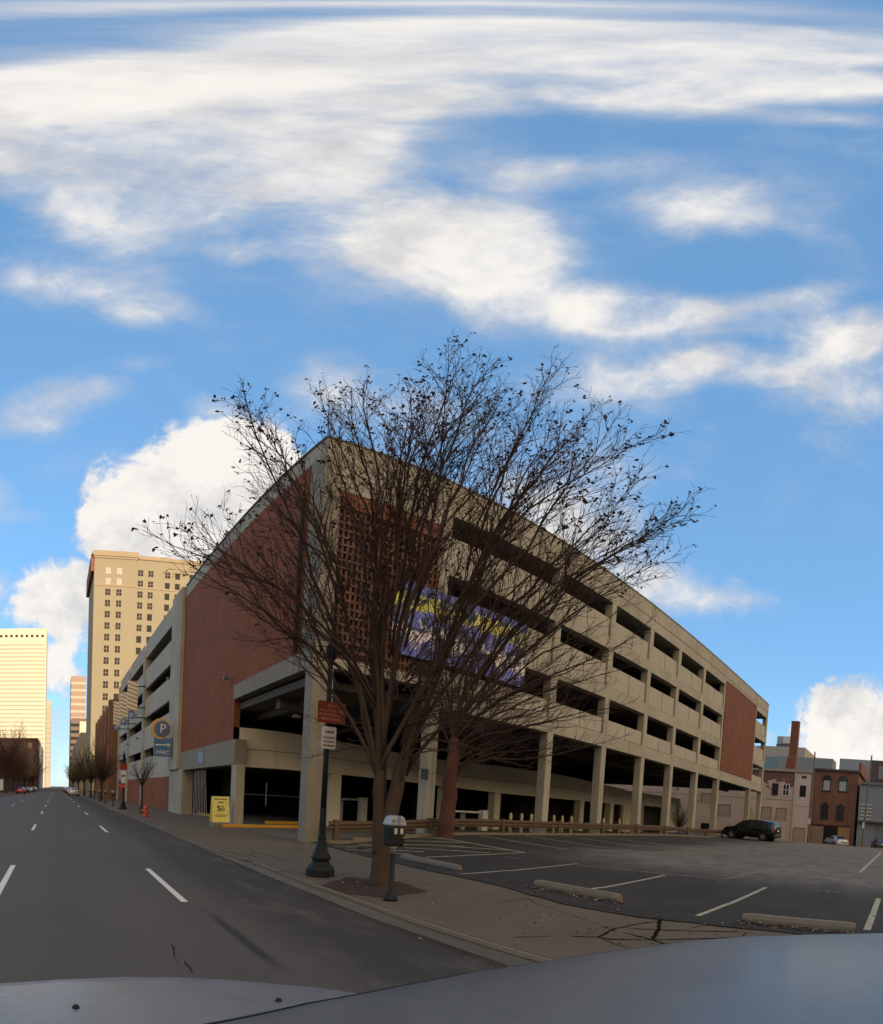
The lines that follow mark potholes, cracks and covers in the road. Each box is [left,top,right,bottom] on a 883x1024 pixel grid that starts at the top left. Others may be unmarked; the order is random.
crack [499,898,747,948]
